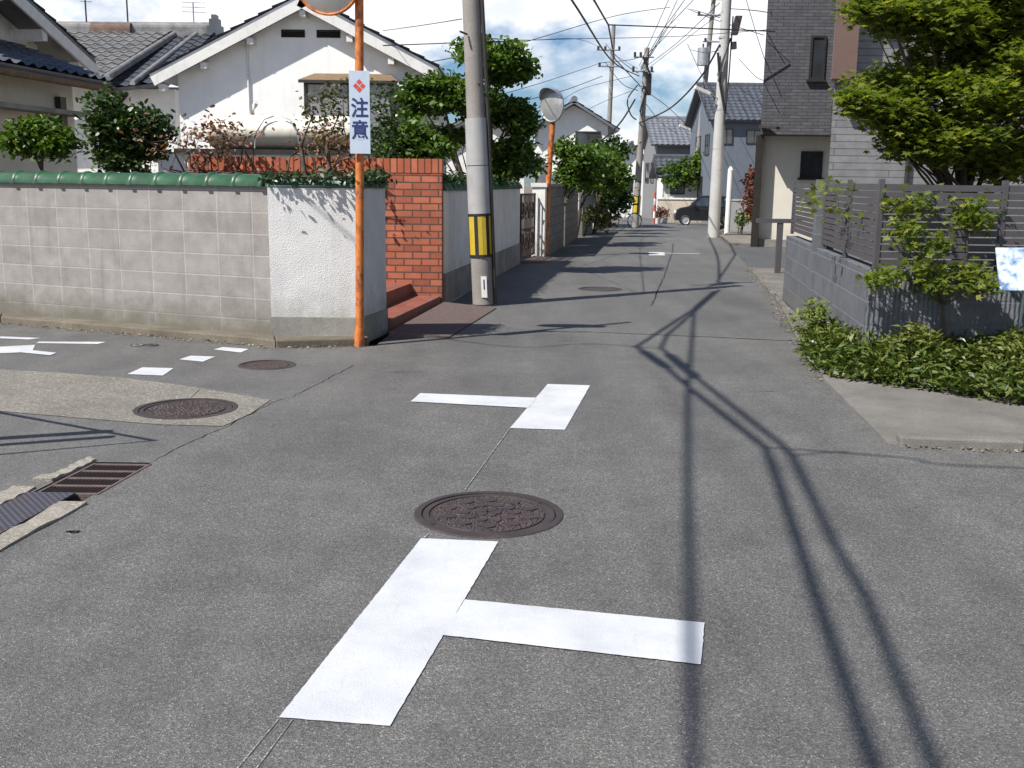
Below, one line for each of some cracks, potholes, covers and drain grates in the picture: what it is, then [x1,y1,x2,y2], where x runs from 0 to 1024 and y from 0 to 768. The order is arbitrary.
drain grate [37,463,152,500]
manhole cover [414,491,564,539]
crack [652,245,673,305]
manhole cover [238,360,296,370]
manhole cover [133,398,238,420]
crack [154,365,354,461]
